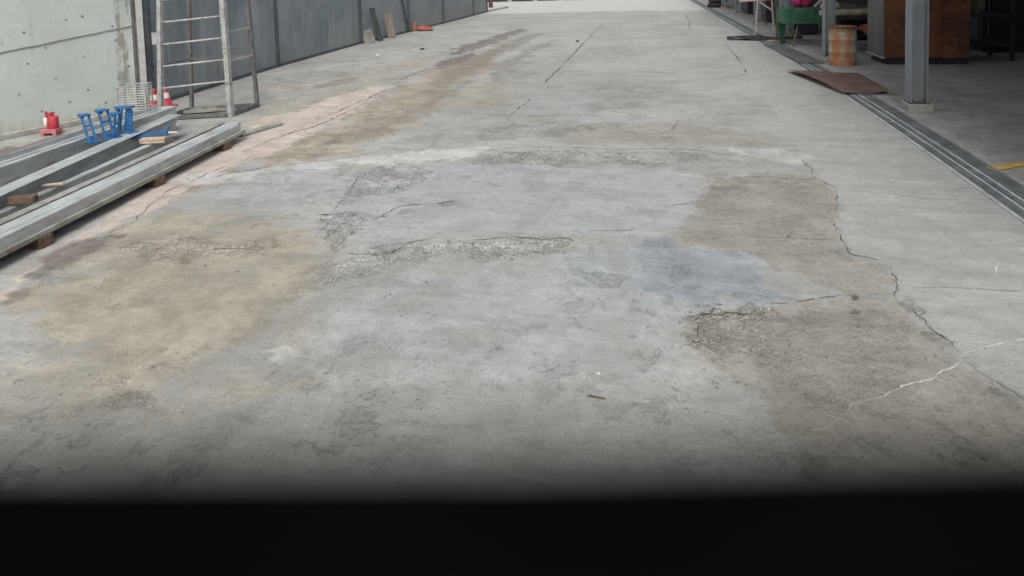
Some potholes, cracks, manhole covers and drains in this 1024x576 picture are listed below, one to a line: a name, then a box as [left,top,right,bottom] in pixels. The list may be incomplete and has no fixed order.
crack [32,31,515,268]
pothole [472,149,642,167]
pothole [682,301,781,352]
pothole [348,165,432,196]
crack [783,160,1024,430]
pothole [367,237,572,263]
pothole [316,212,371,252]
